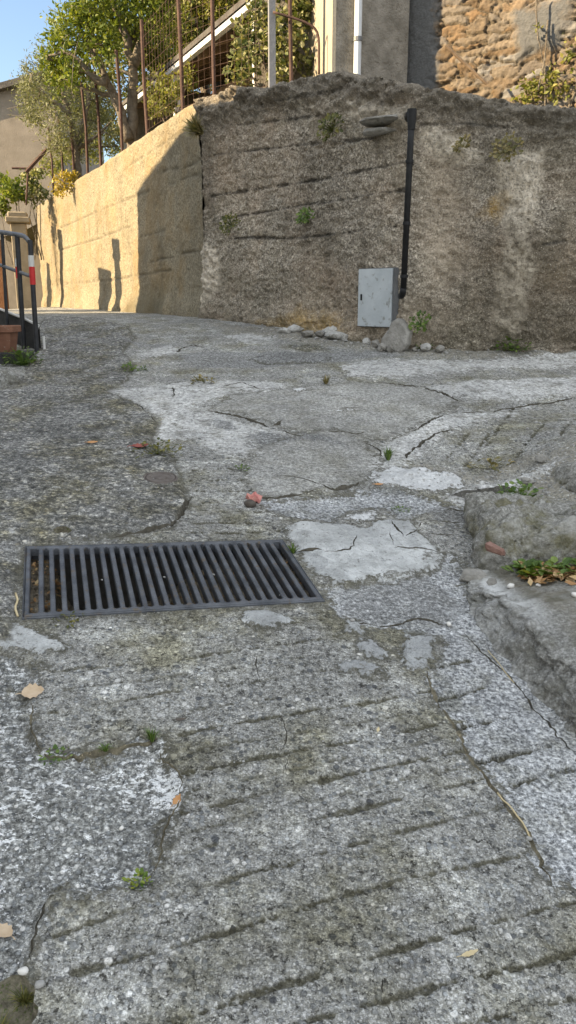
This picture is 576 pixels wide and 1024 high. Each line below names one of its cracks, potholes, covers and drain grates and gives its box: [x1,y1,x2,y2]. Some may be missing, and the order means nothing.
crack [209,410,300,436]
crack [377,382,572,458]
manhole cover [143,472,178,484]
crack [330,407,383,457]
crack [112,499,191,538]
crack [29,898,48,960]
drain grate [22,539,325,620]
crack [262,475,359,500]
crack [29,703,183,878]
crack [426,671,552,886]
